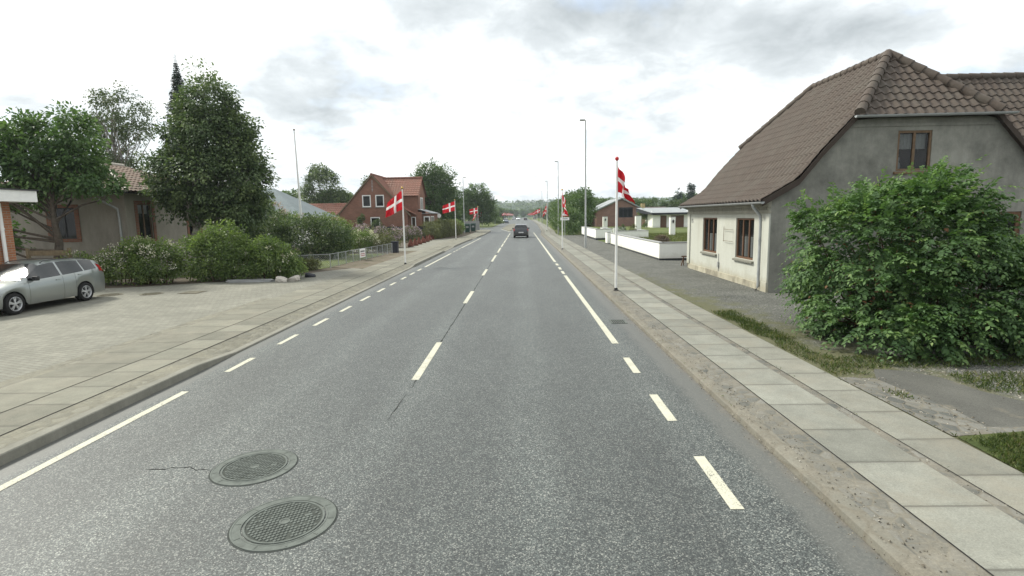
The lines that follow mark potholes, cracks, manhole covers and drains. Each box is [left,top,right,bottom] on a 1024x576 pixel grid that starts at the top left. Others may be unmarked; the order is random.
manhole cover [227,495,338,553]
manhole cover [208,449,299,487]
crack [390,254,497,417]
